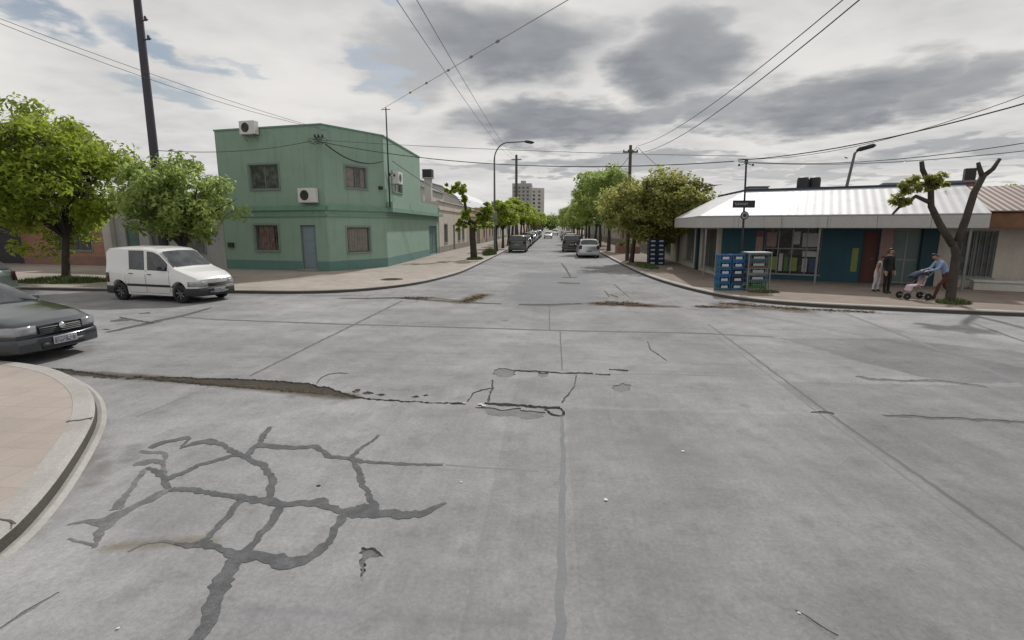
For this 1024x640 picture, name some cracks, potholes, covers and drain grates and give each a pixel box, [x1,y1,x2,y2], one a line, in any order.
crack [855,376,987,388]
crack [0,592,59,630]
pothole [612,383,631,392]
crack [52,368,577,417]
crack [795,610,838,640]
pothole [359,547,383,577]
pothole [494,368,516,378]
crack [881,414,1024,424]
